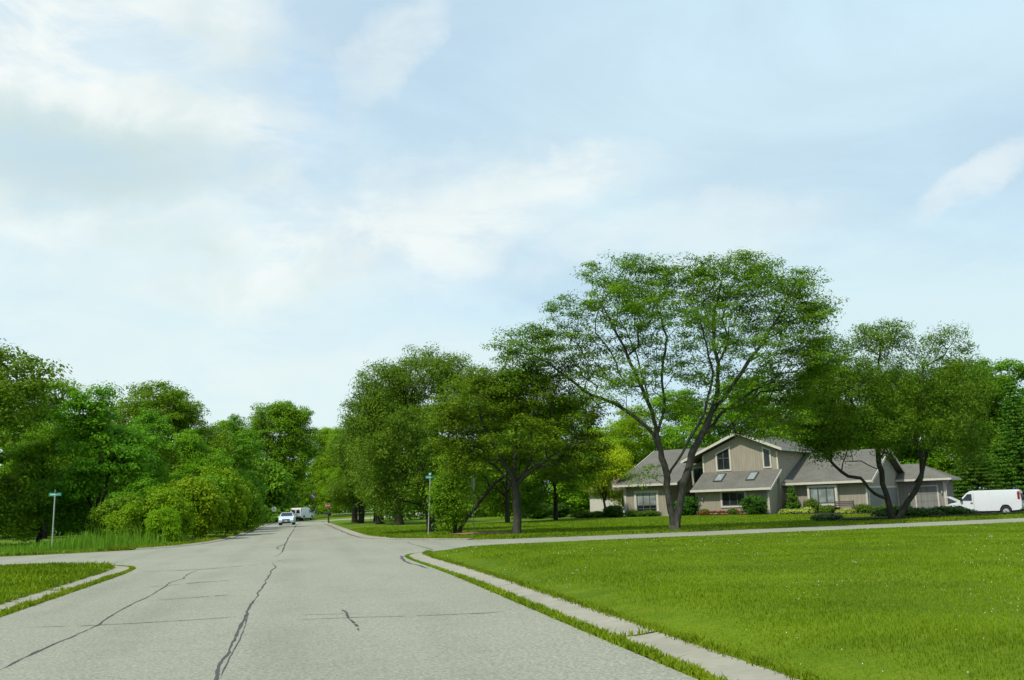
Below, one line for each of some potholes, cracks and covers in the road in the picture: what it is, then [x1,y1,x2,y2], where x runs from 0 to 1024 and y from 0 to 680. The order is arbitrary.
crack [298,609,504,630]
crack [0,529,294,680]
